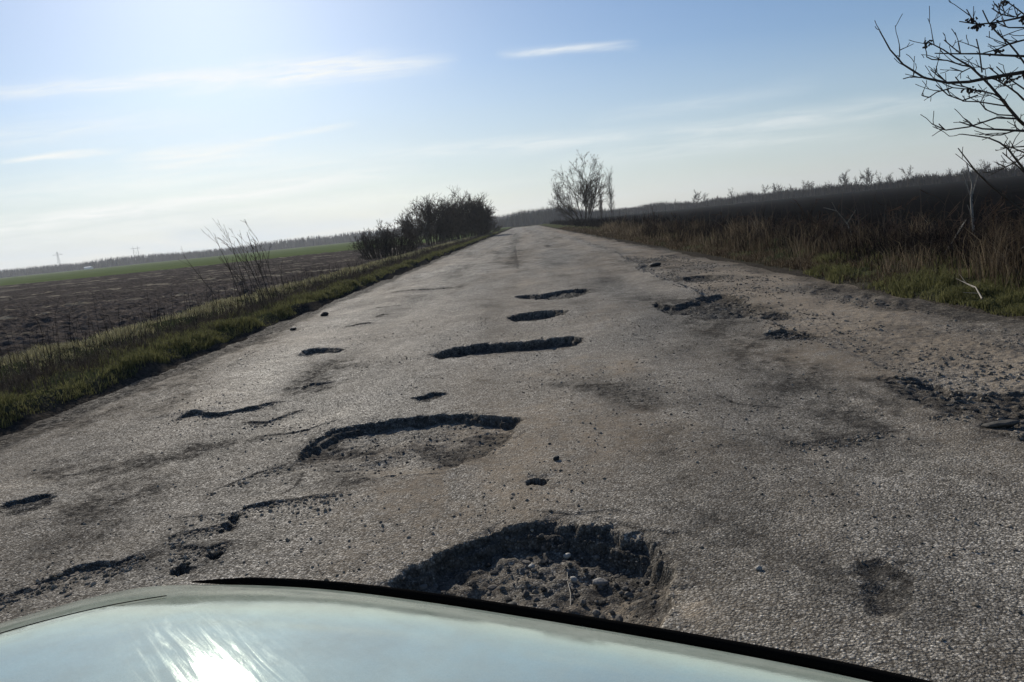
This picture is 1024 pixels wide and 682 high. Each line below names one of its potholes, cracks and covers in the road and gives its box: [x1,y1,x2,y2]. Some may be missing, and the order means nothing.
pothole [293,413,524,478]
pothole [877,375,1024,432]
pothole [0,494,58,517]
pothole [170,562,193,577]
pothole [221,515,242,532]
